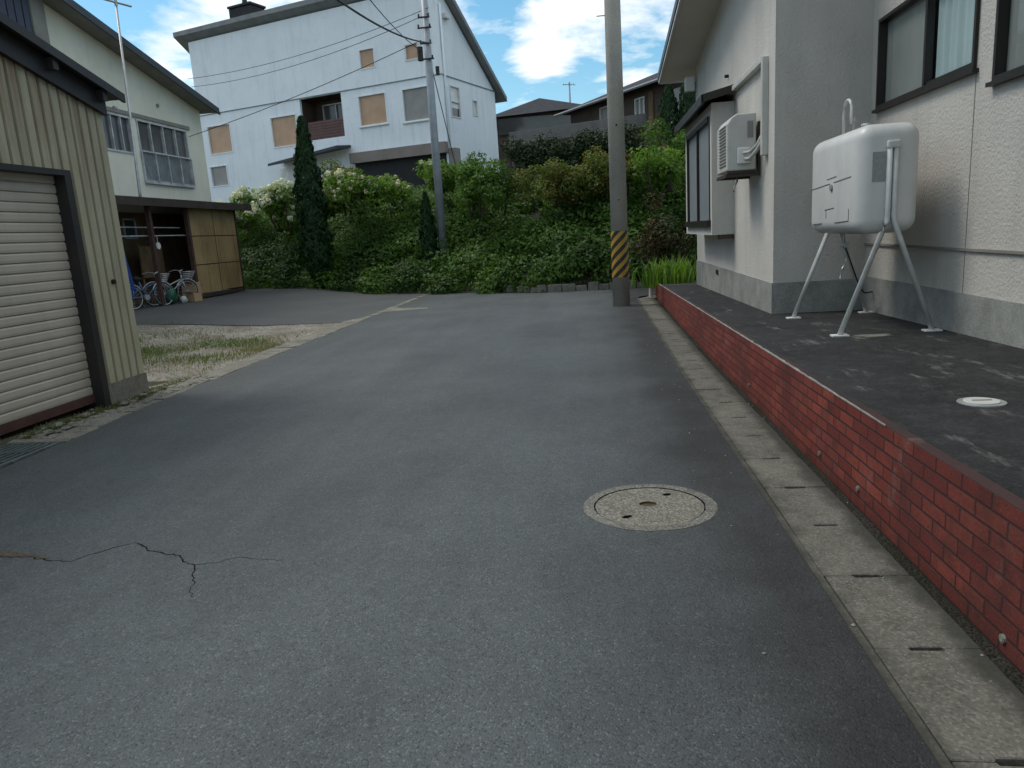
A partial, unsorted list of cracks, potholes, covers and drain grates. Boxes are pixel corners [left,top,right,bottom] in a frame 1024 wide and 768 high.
crack [0,542,278,601]
drain grate [0,442,61,469]
manhole cover [583,484,718,531]
utility cover [956,397,1008,408]
